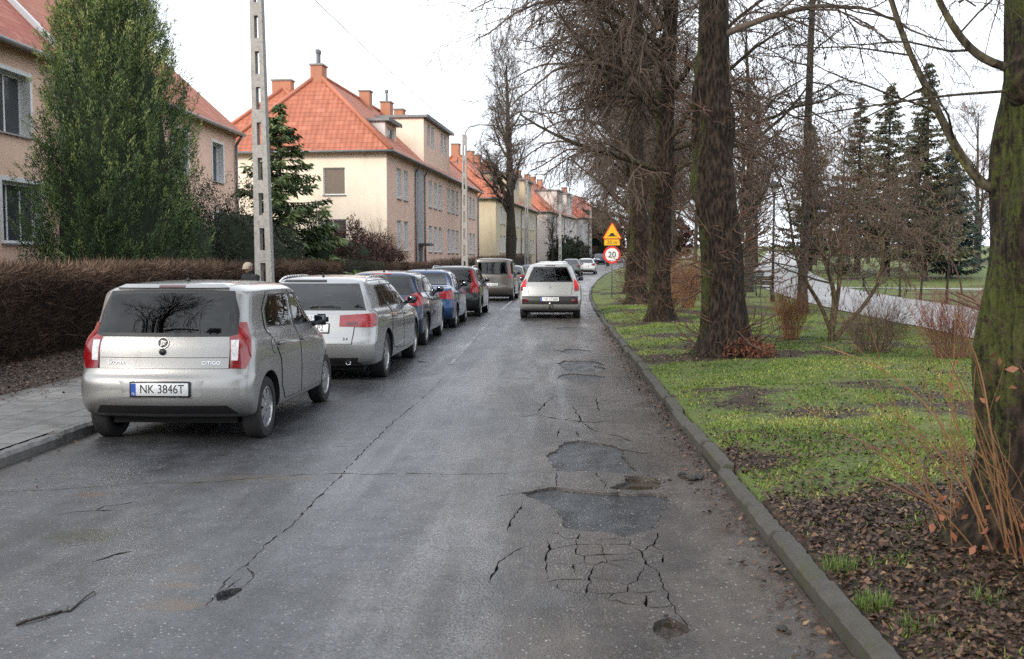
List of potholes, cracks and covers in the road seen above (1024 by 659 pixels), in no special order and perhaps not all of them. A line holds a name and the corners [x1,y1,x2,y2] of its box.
pothole [545,440,637,473]
pothole [609,474,665,491]
pothole [210,585,247,602]
pothole [644,614,696,644]
crack [544,531,688,626]
crack [9,373,662,606]
pothole [514,484,674,538]
